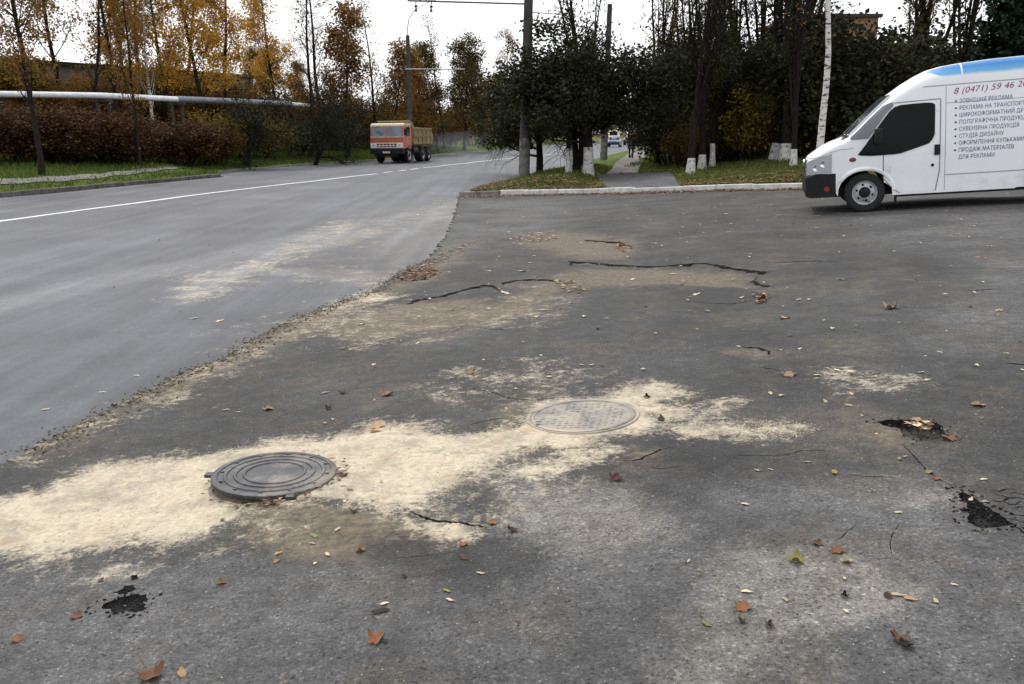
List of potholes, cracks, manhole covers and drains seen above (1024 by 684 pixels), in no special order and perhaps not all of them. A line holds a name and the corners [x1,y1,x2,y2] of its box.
crack [848,445,957,488]
crack [623,448,683,469]
crack [993,489,1024,534]
pothole [101,575,148,613]
pothole [958,489,1013,529]
crack [409,511,487,528]
pothole [877,419,950,443]
manhole cover [204,452,344,504]
manhole cover [526,399,640,435]
